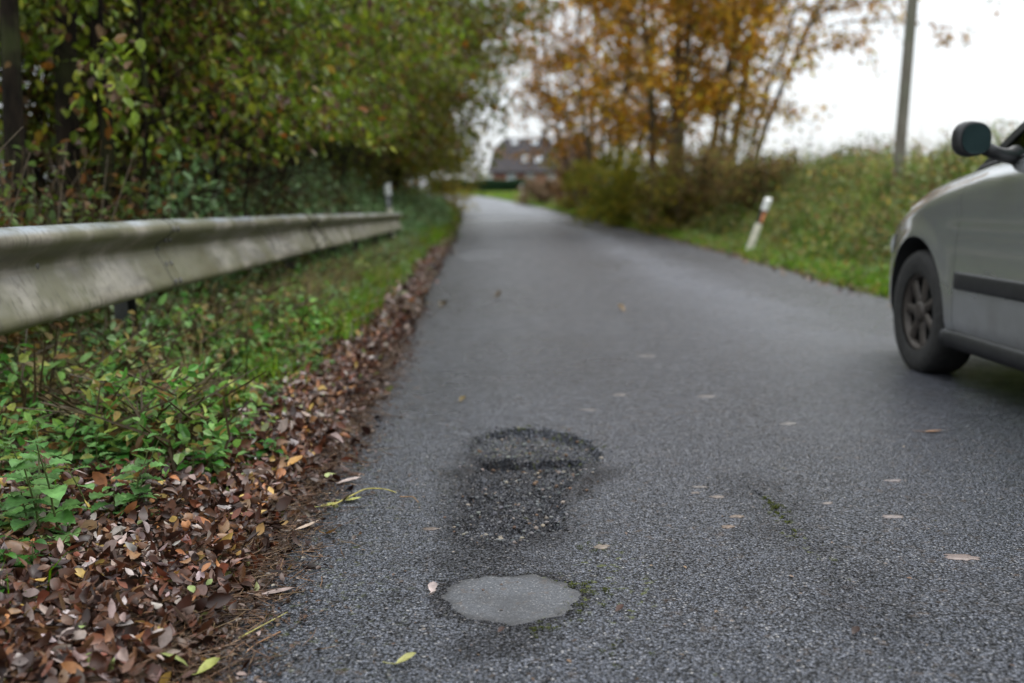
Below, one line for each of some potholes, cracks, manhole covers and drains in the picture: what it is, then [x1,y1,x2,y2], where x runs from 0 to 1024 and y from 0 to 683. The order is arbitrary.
crack [731,477,883,640]
pothole [445,426,608,547]
